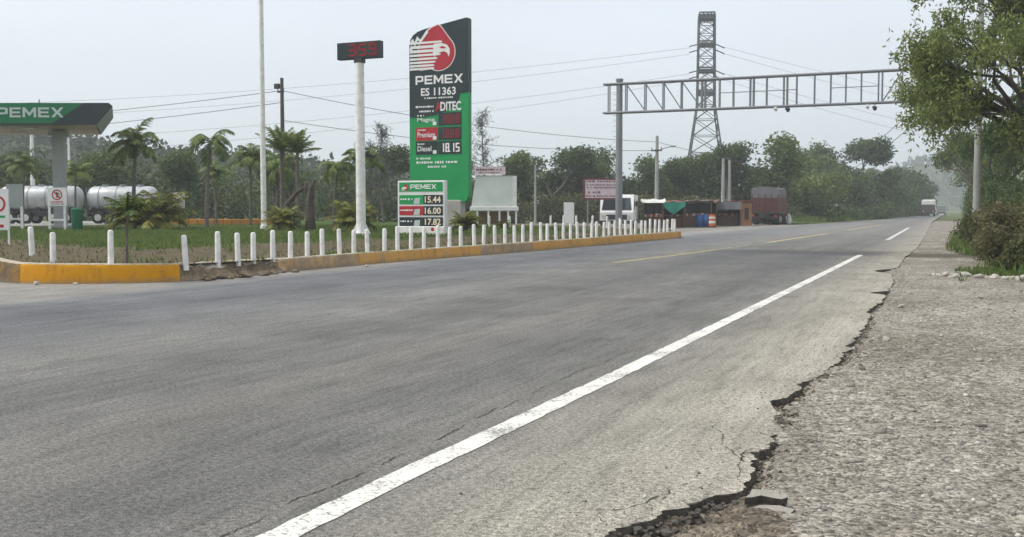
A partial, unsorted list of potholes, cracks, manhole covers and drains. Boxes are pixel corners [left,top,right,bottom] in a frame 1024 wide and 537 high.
crack [712,426,751,477]
crack [581,483,703,521]
